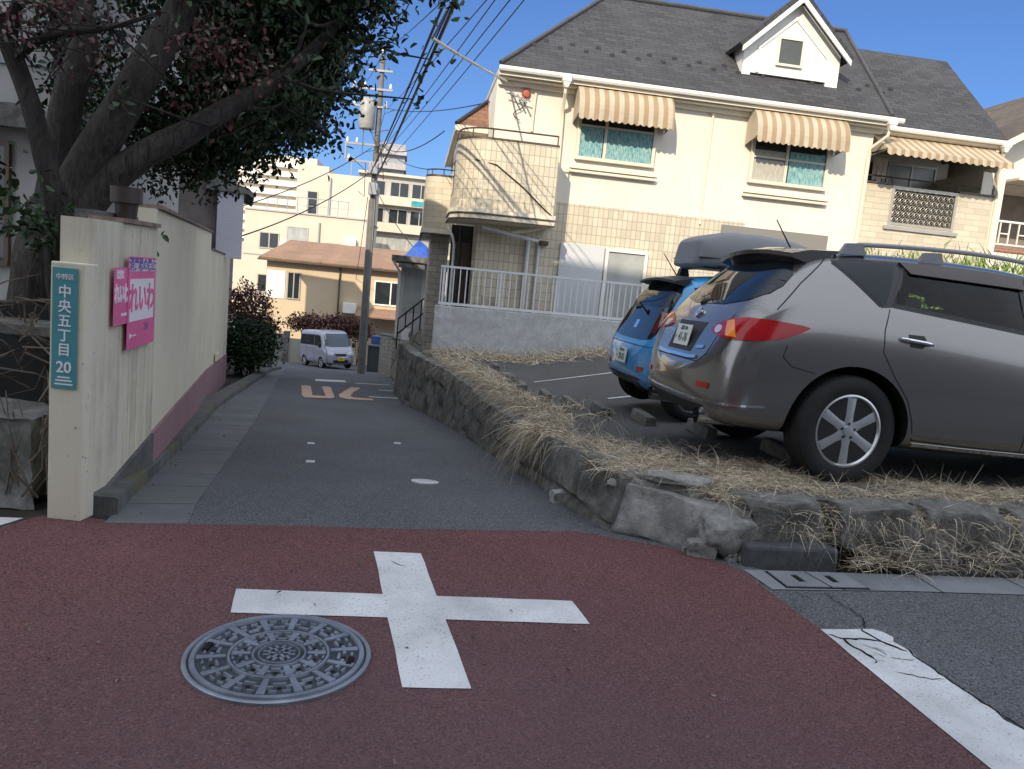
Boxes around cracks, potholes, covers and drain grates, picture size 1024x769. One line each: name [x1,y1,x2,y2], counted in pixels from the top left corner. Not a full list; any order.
crack [794,590,1024,729]
manhole cover [181,614,371,707]
